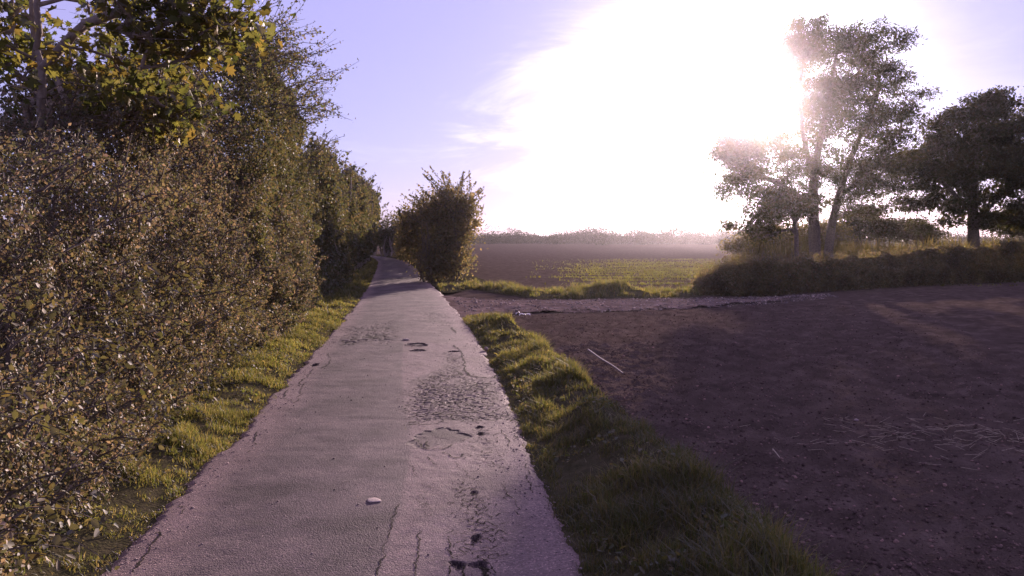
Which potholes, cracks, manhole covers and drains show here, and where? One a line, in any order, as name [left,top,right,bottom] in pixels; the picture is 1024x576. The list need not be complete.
crack [132,532,162,572]
crack [283,306,548,576]
pothole [406,427,473,448]
